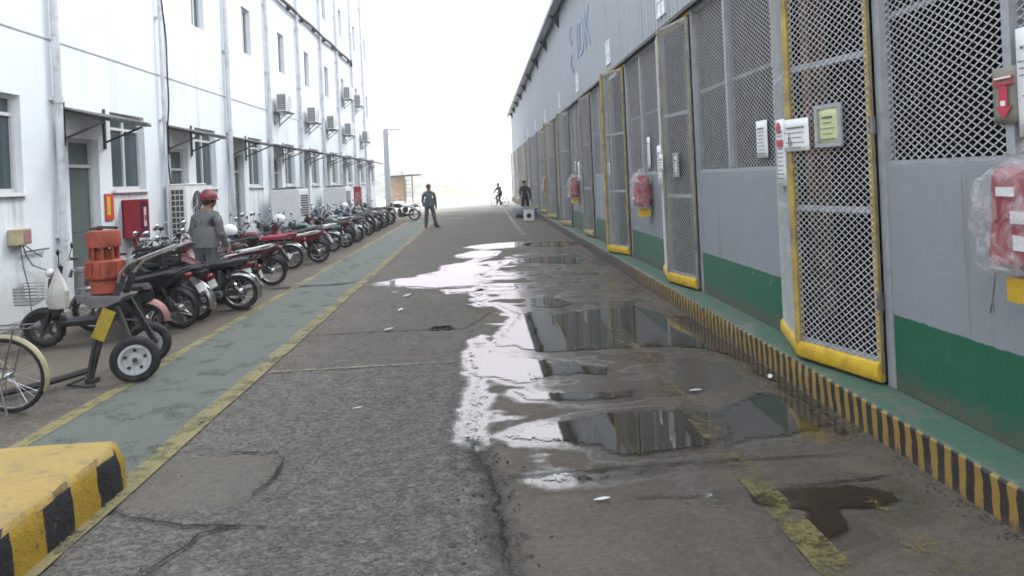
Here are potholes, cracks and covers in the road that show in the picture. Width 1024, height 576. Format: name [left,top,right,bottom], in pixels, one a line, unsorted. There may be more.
crack [113,451,284,574]
